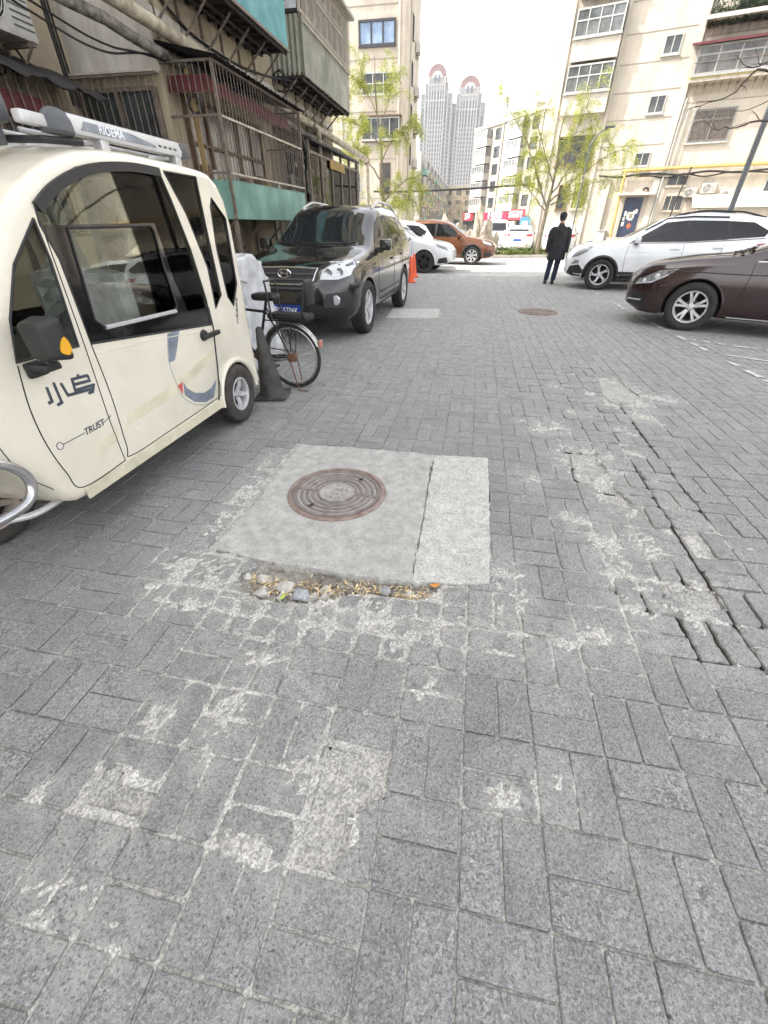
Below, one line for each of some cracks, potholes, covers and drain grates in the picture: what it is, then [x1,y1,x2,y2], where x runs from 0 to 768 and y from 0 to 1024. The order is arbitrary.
manhole cover [287,468,386,522]
pothole [238,563,441,603]
manhole cover [518,308,558,316]
